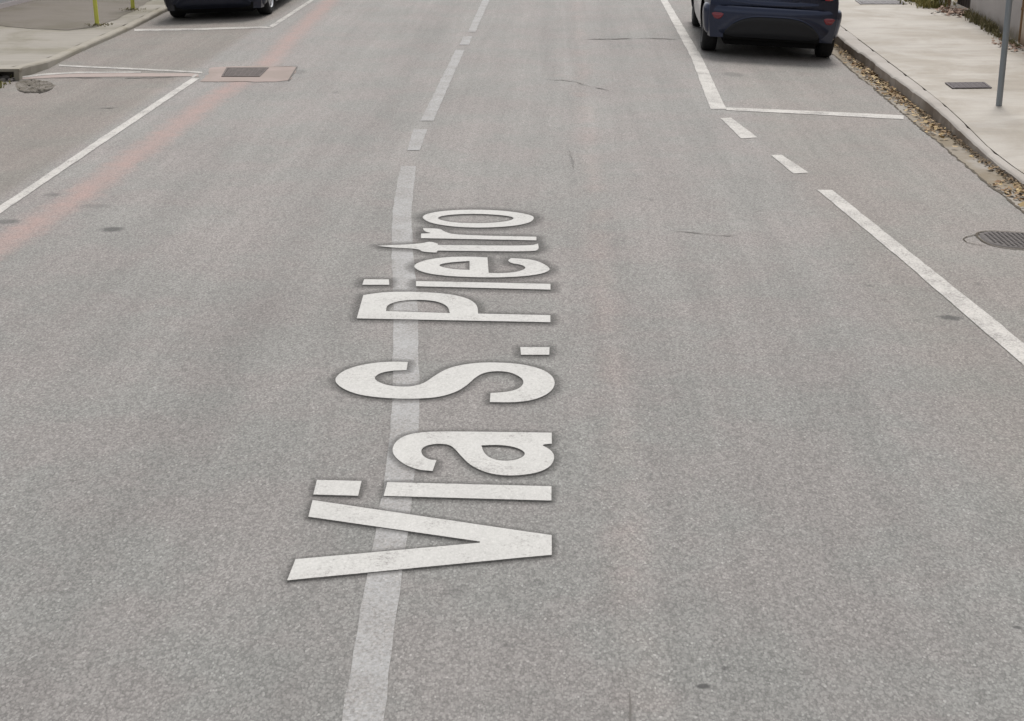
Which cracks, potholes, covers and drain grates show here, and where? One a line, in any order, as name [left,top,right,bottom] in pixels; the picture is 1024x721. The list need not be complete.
manhole cover [200,65,298,82]
